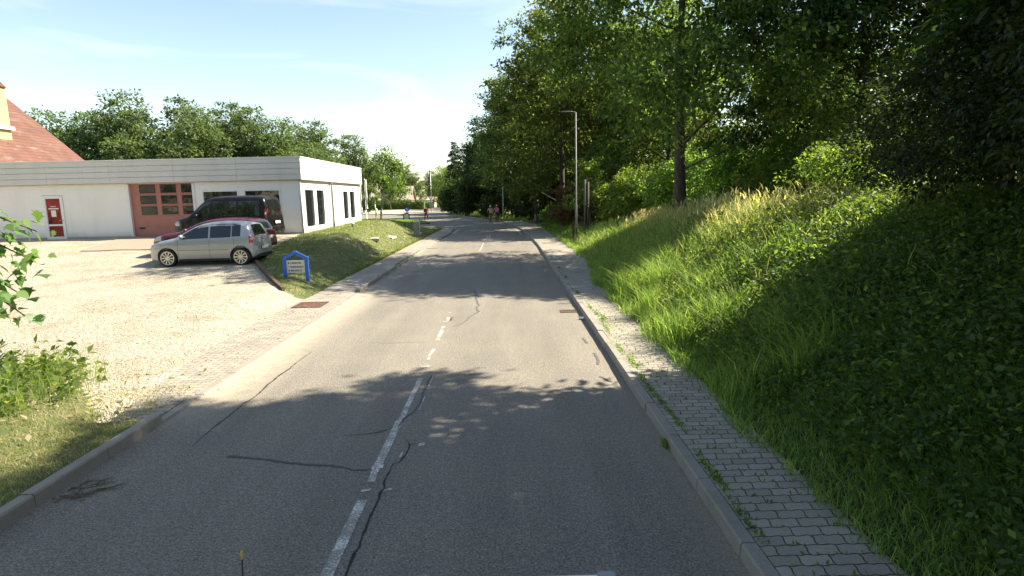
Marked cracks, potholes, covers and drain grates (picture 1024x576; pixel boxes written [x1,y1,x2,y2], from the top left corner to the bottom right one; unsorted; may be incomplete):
crack [227,426,422,576]
crack [195,352,311,444]
